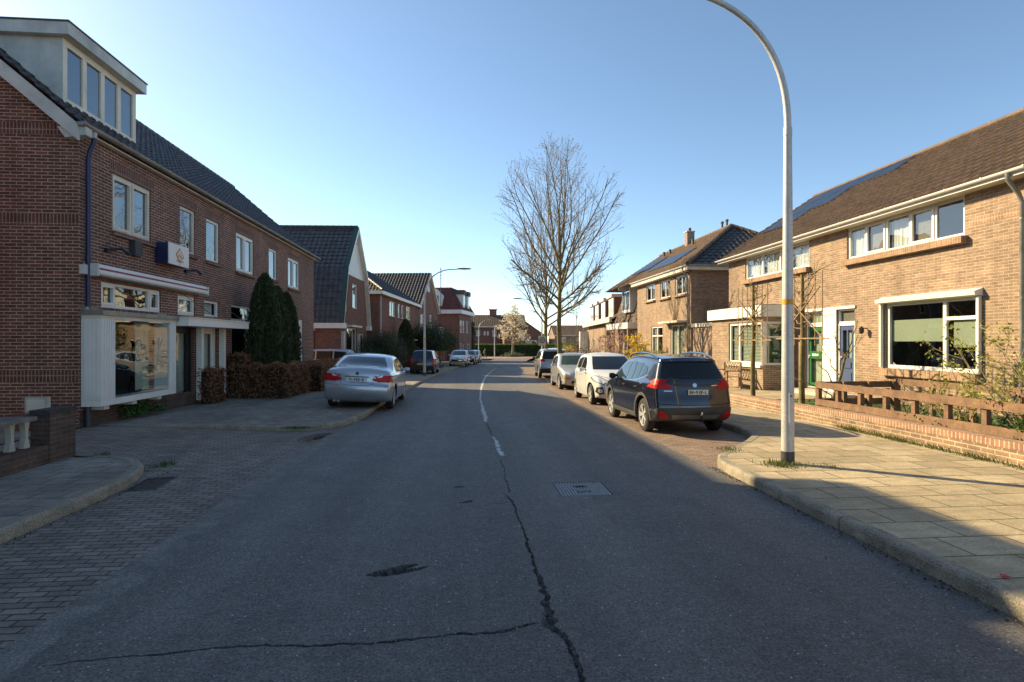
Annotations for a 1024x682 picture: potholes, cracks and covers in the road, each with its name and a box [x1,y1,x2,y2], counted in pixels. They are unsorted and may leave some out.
pothole [366,564,430,577]
crack [44,460,586,682]
